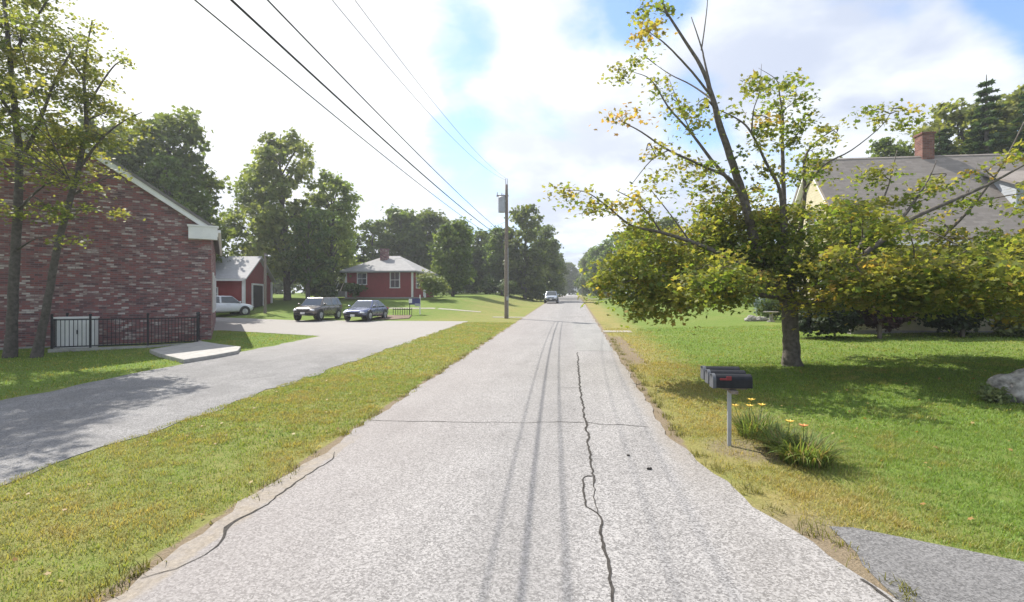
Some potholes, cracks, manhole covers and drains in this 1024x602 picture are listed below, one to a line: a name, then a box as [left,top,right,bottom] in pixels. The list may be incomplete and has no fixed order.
crack [378,352,645,602]
crack [143,452,335,578]
